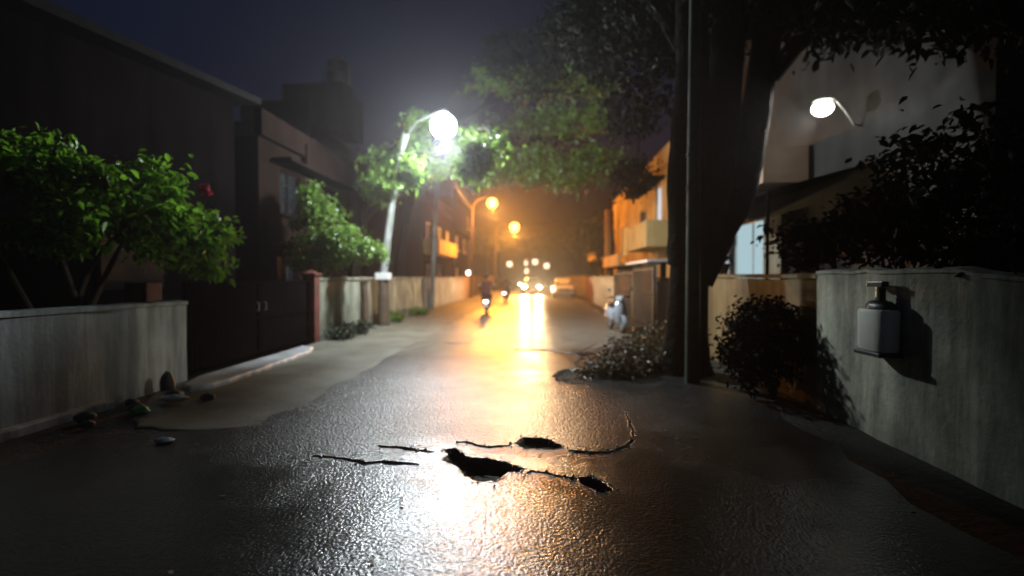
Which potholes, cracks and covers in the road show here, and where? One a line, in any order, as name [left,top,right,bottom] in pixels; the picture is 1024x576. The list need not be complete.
crack [456,440,510,448]
pothole [572,474,619,494]
pothole [439,447,531,487]
crack [311,445,434,466]
crack [527,411,637,480]
pothole [509,435,568,451]
